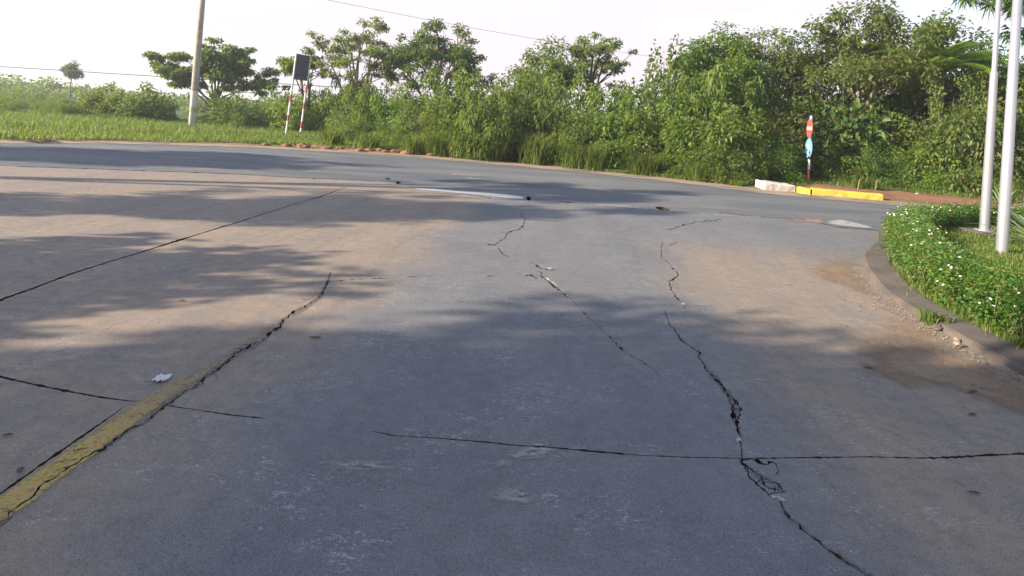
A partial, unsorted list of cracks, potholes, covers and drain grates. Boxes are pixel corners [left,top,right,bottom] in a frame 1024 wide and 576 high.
crack [0,274,429,527]
crack [661,219,874,576]
crack [488,213,530,257]
crack [525,262,658,374]
